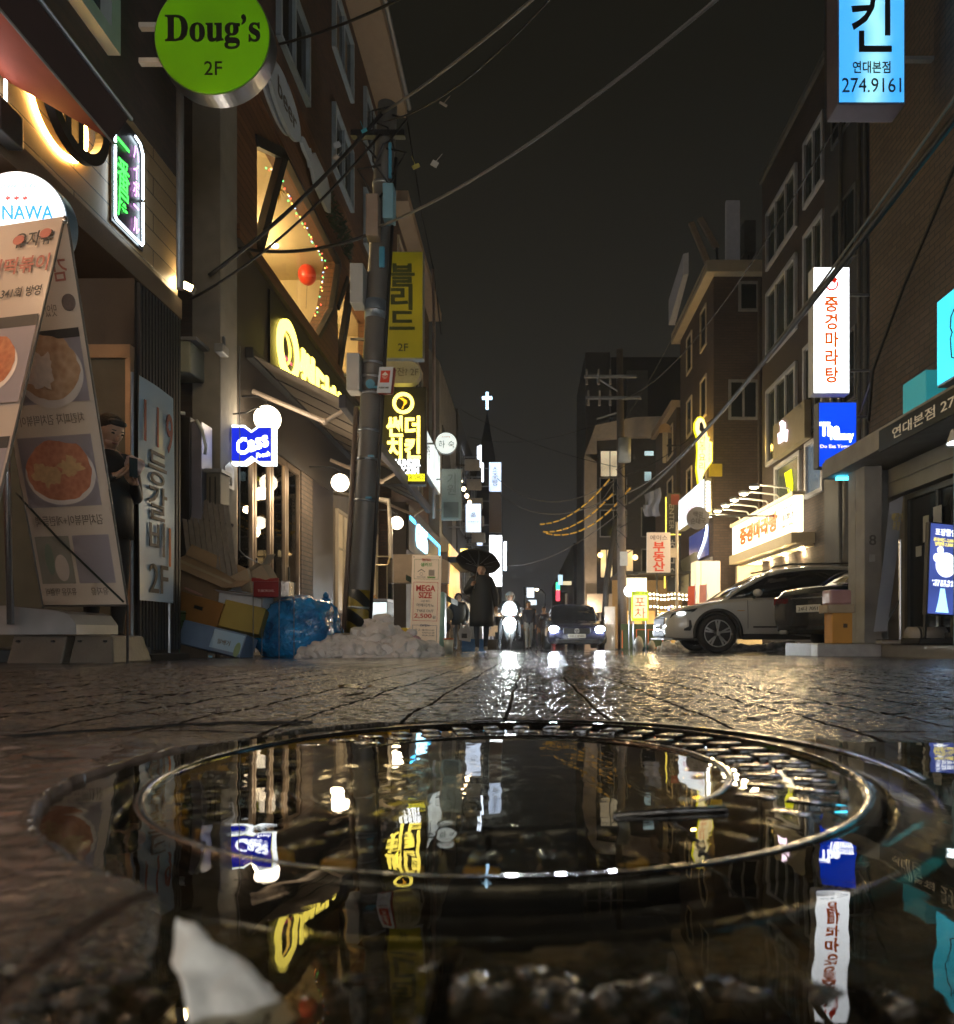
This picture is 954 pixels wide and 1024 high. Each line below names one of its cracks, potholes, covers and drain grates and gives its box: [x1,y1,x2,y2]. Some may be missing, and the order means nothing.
manhole cover [44,719,954,954]
